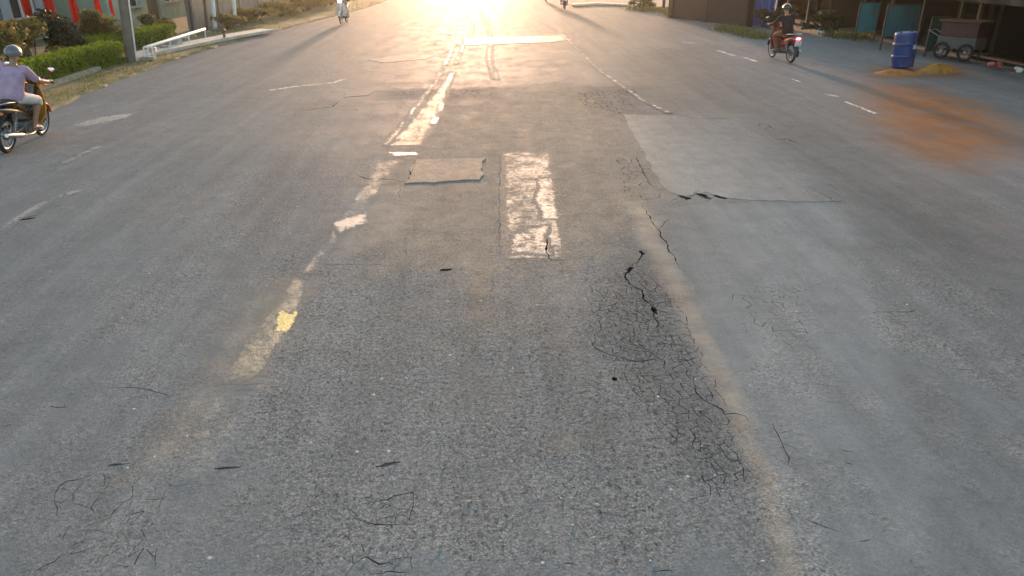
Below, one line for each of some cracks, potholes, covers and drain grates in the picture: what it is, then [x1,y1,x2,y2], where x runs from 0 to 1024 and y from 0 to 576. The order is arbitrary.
crack [589,157,750,502]
crack [347,492,415,575]
crack [732,284,811,345]
crack [54,470,166,570]
